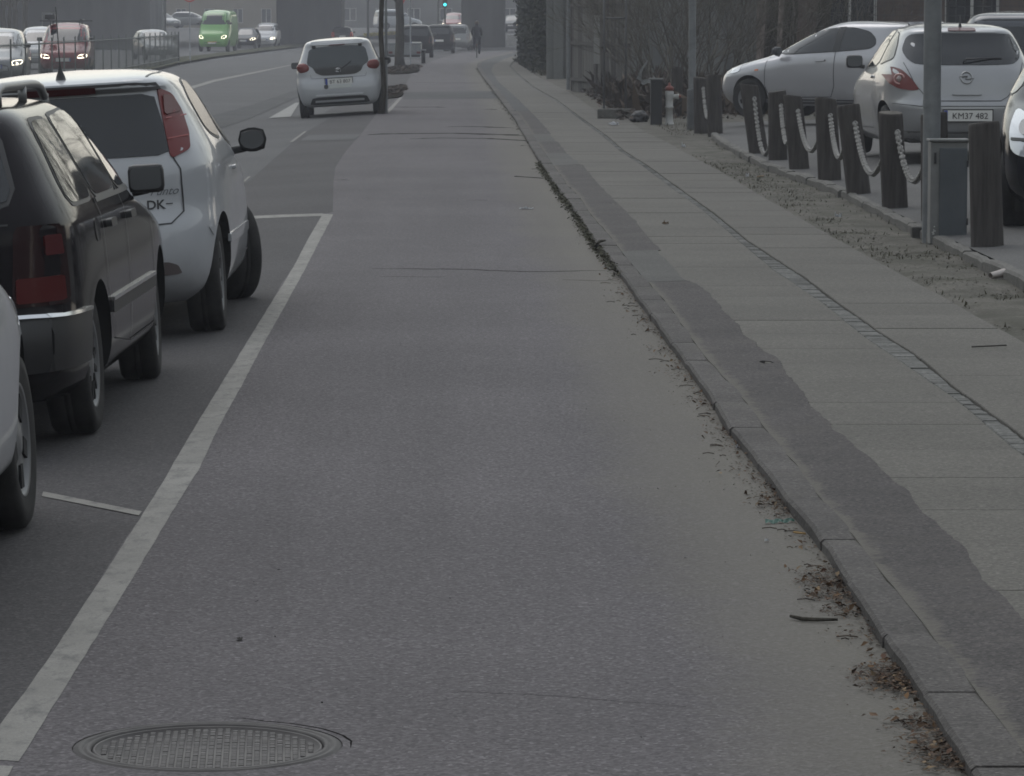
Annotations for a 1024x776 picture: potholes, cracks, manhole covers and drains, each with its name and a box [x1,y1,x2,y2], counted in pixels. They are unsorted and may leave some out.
crack [462,691,684,707]
manhole cover [73,722,342,772]
